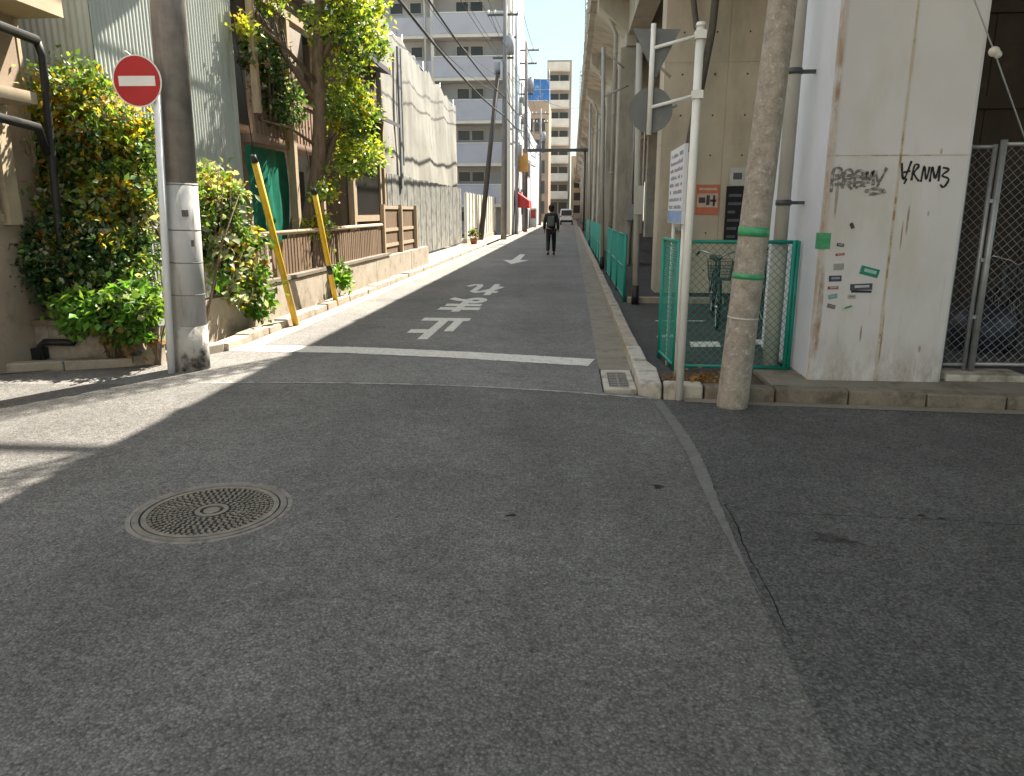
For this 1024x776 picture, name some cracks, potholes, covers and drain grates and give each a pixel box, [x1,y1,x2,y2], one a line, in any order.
crack [725,503,1020,643]
drain grate [601,370,637,395]
manhole cover [125,482,293,544]
